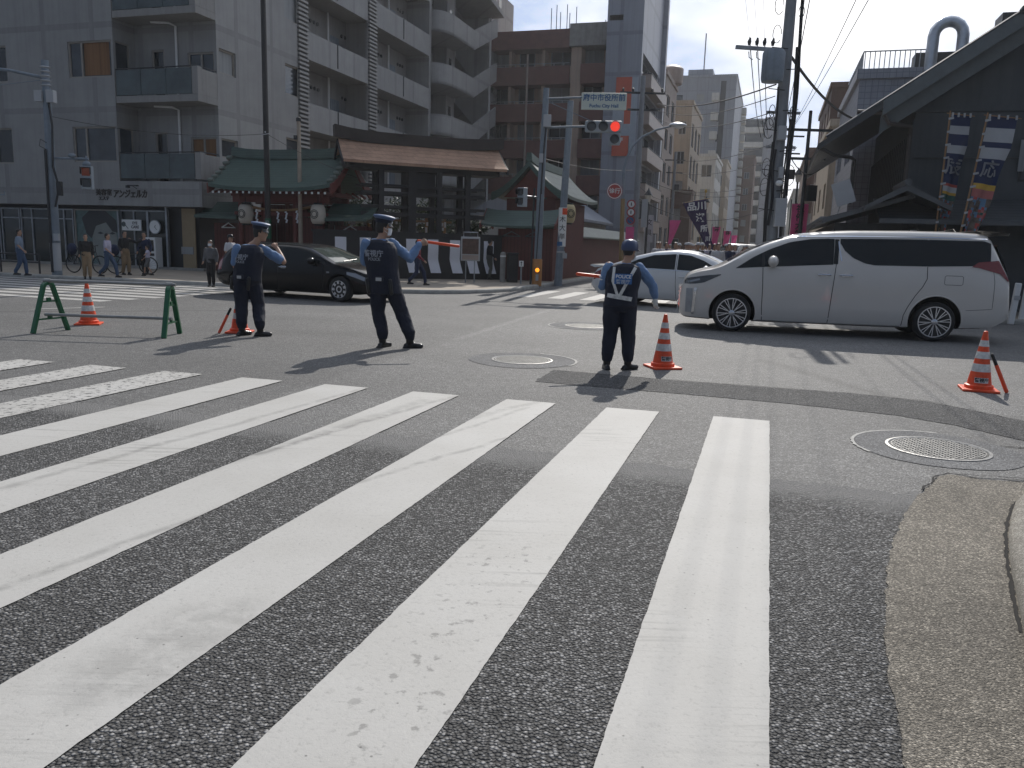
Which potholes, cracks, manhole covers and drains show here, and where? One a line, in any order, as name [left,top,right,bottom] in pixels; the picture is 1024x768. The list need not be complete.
manhole cover [469,353,578,368]
manhole cover [547,322,620,330]
manhole cover [850,430,1024,470]
